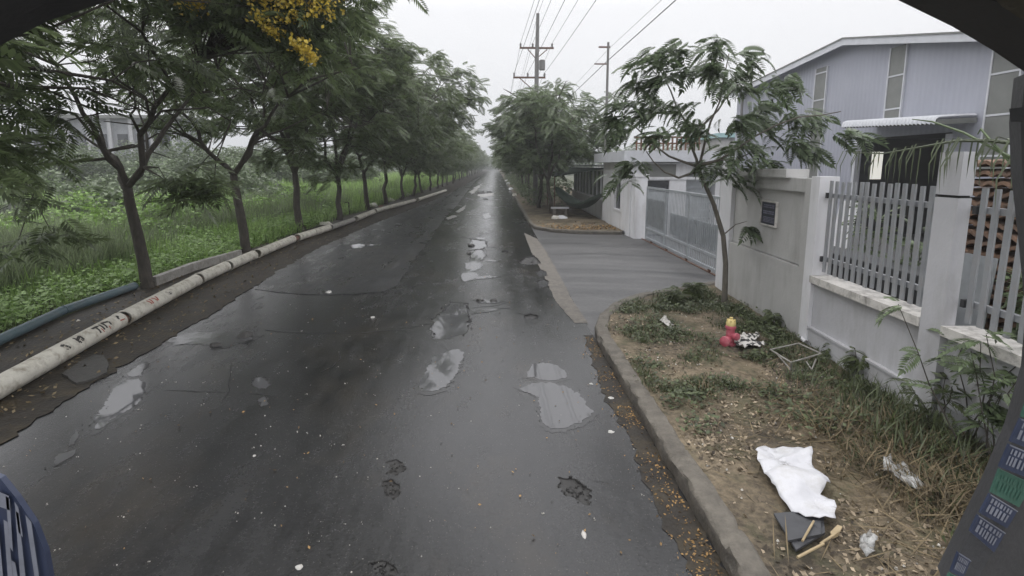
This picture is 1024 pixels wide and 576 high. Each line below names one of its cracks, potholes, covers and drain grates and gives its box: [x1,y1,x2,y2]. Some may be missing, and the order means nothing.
pothole [557,475,592,506]
pothole [429,301,472,339]
pothole [385,459,407,475]
pothole [469,239,488,249]
pothole [469,248,486,261]
pothole [381,478,401,499]
pothole [368,560,399,576]
